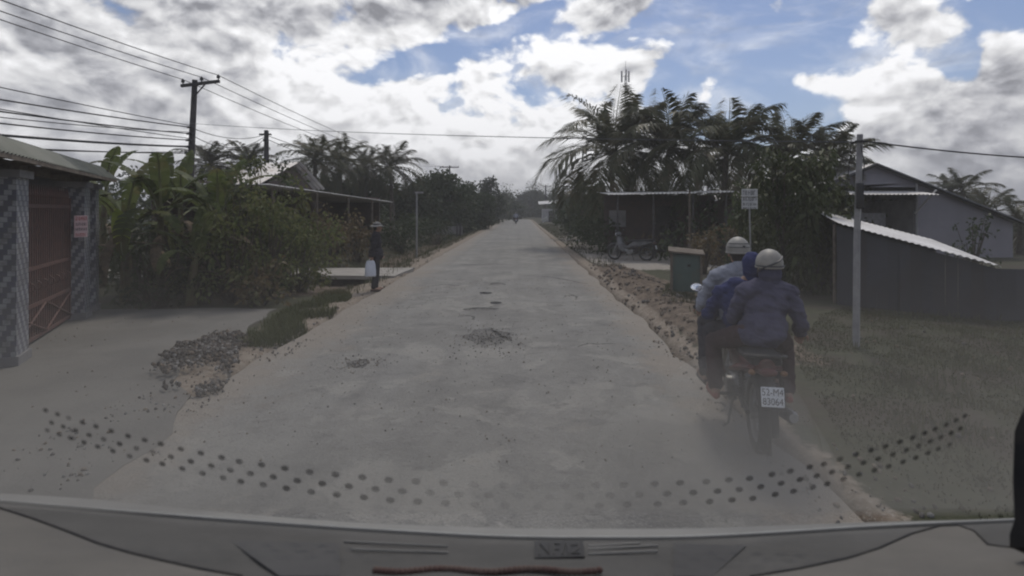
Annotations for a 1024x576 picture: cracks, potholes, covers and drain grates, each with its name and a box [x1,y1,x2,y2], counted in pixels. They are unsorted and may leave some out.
pothole [461,328,512,346]
pothole [346,359,370,368]
